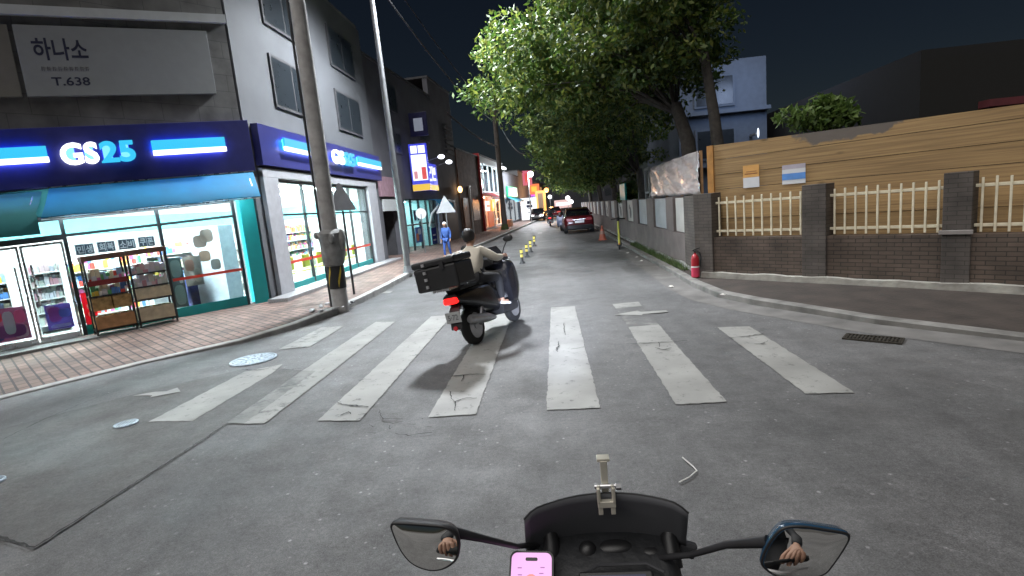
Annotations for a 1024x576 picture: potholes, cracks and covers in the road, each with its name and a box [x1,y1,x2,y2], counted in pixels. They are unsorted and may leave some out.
drain grate [842,333,905,345]
crack [337,402,431,436]
manhole cover [229,353,277,367]
manhole cover [113,419,139,429]
